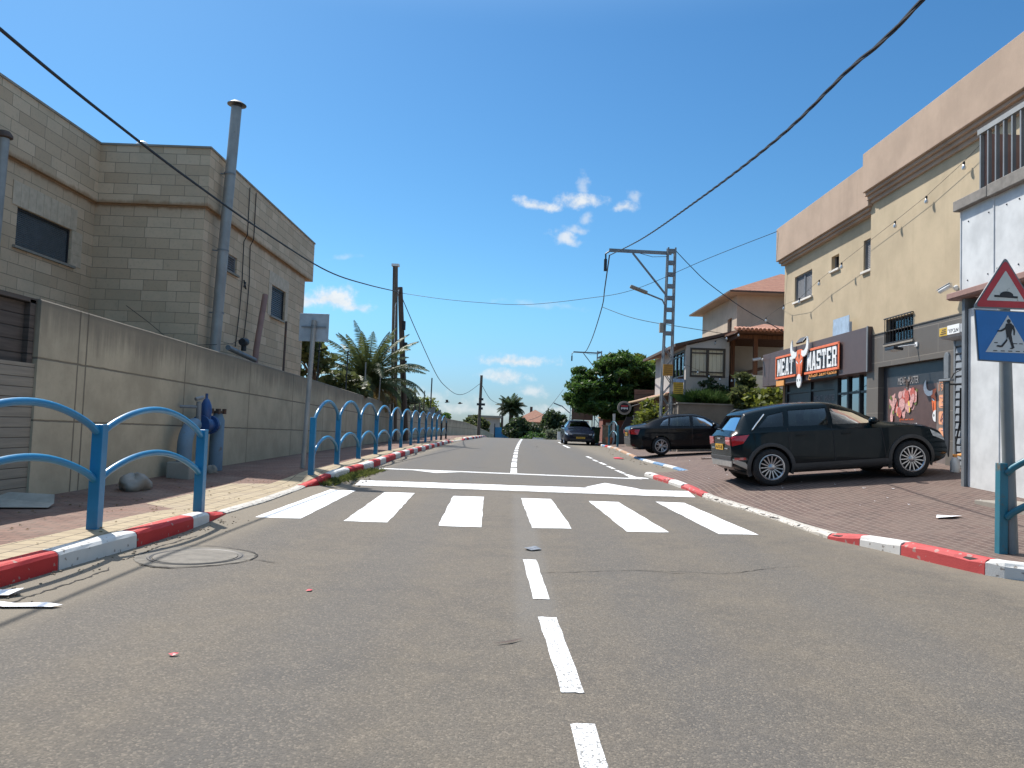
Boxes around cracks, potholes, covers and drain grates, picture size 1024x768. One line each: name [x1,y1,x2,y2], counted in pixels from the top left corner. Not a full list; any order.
manhole cover [133,546,255,567]
crack [0,536,281,607]
